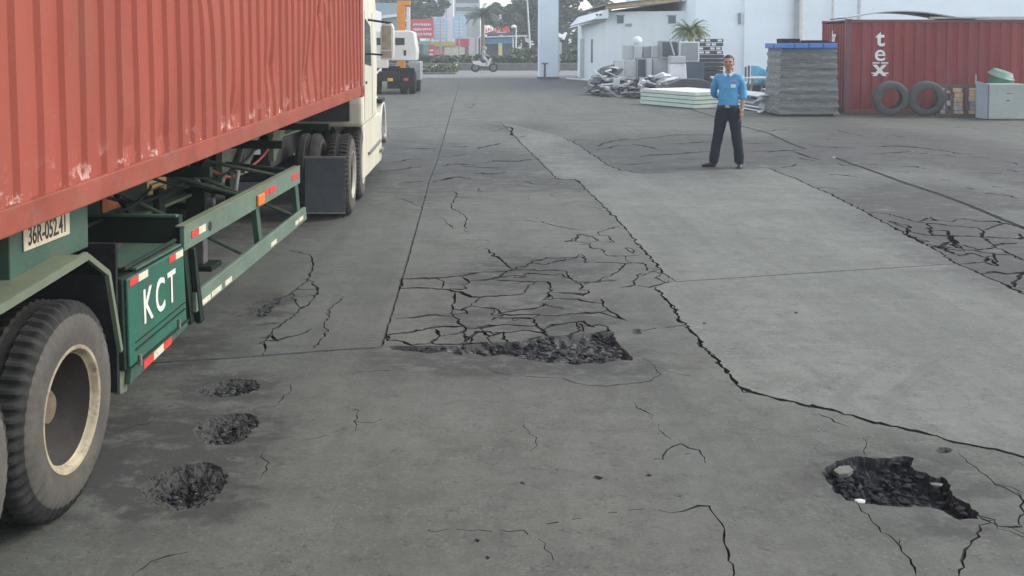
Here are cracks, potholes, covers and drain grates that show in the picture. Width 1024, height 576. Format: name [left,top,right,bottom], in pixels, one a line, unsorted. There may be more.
pothole [140,462,229,511]
crack [364,104,1024,576]
pothole [193,413,259,445]
pothole [384,332,633,365]
pothole [196,379,261,397]
crack [258,250,344,355]
pothole [821,456,979,520]
